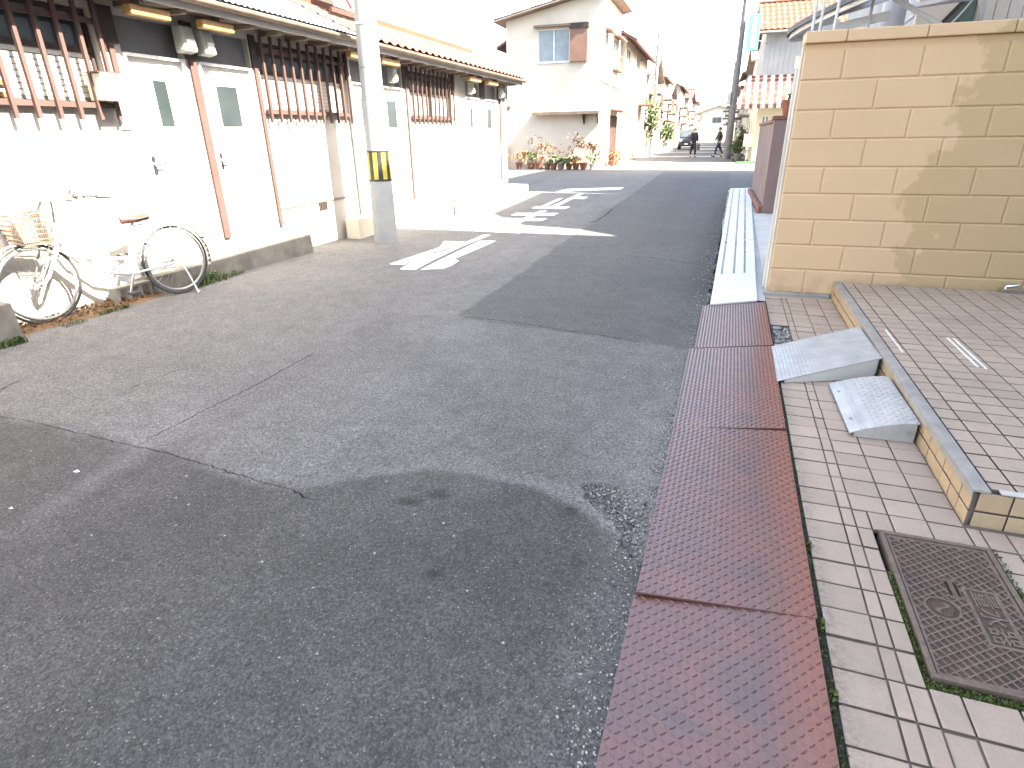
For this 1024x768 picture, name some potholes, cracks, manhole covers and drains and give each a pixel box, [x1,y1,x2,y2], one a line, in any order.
manhole cover [876,529,1024,706]
crack [0,351,333,509]
pothole [572,479,656,567]
